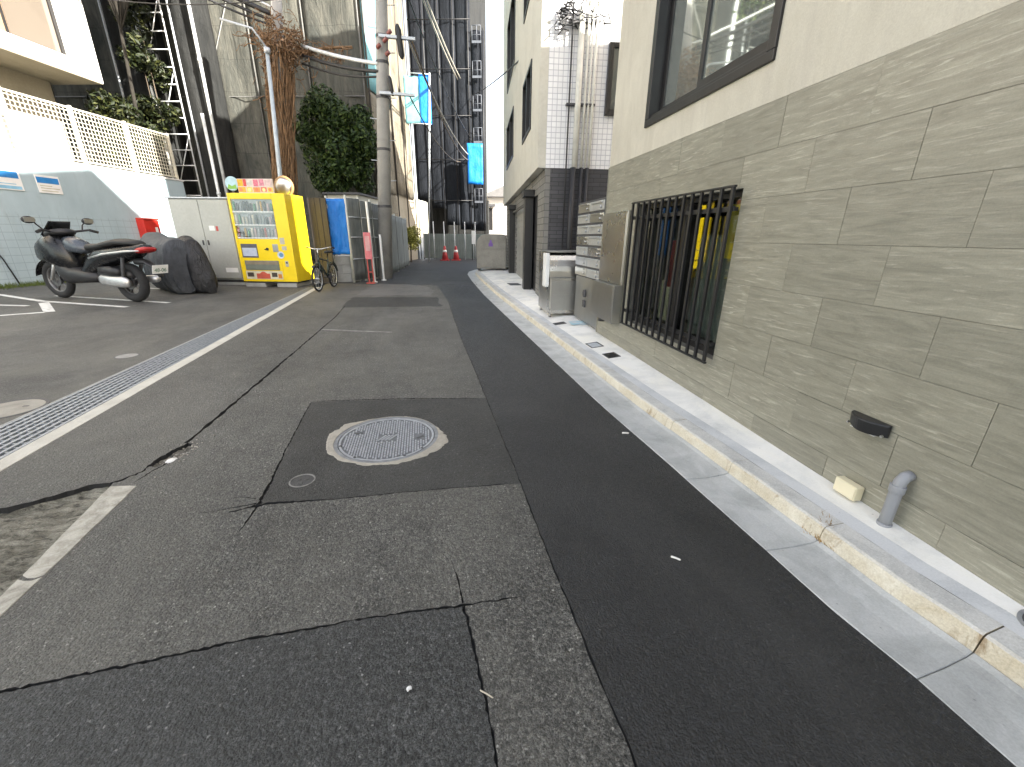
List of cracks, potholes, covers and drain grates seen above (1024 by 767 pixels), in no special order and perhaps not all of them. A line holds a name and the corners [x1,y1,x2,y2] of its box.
drain grate [264,299,293,308]
drain grate [152,334,229,359]
drain grate [0,394,119,459]
drain grate [67,357,187,397]
crack [110,463,167,485]
manhole cover [326,416,448,466]
pothole [149,443,192,467]
manhole cover [0,398,50,419]
drain grate [240,307,278,319]
crack [0,566,518,767]
manhole cover [289,474,316,487]
drain grate [205,319,256,335]
